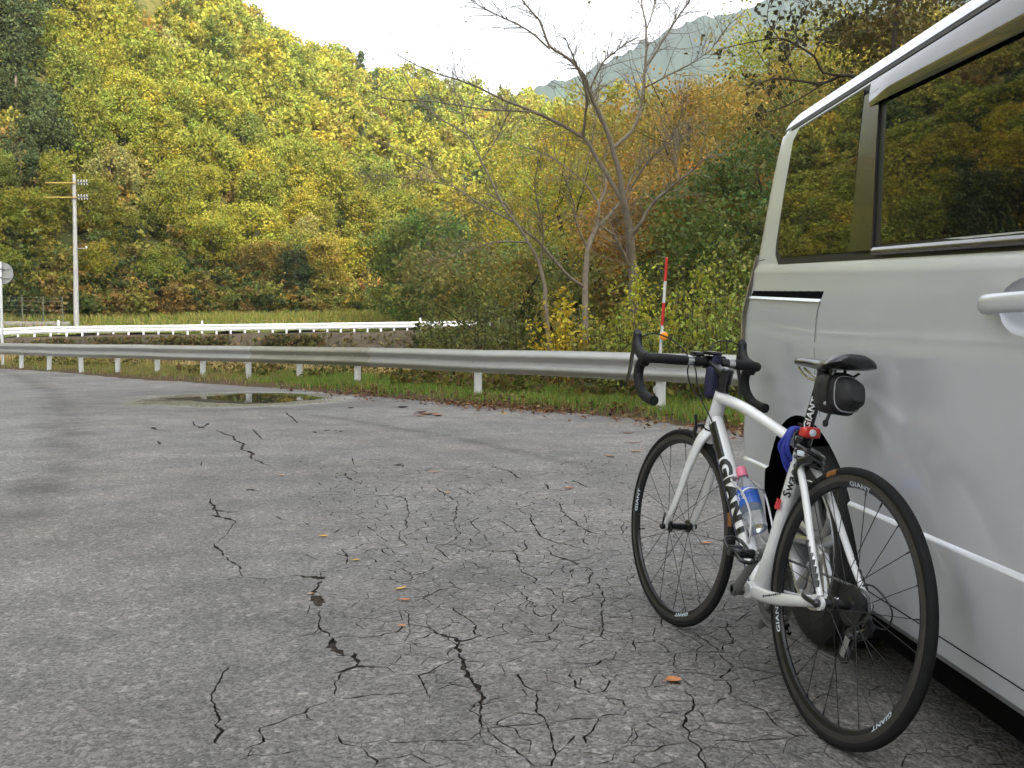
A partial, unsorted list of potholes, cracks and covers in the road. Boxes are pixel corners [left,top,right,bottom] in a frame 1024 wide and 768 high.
crack [292,447,1022,768]
crack [193,422,266,465]
crack [209,499,398,757]
